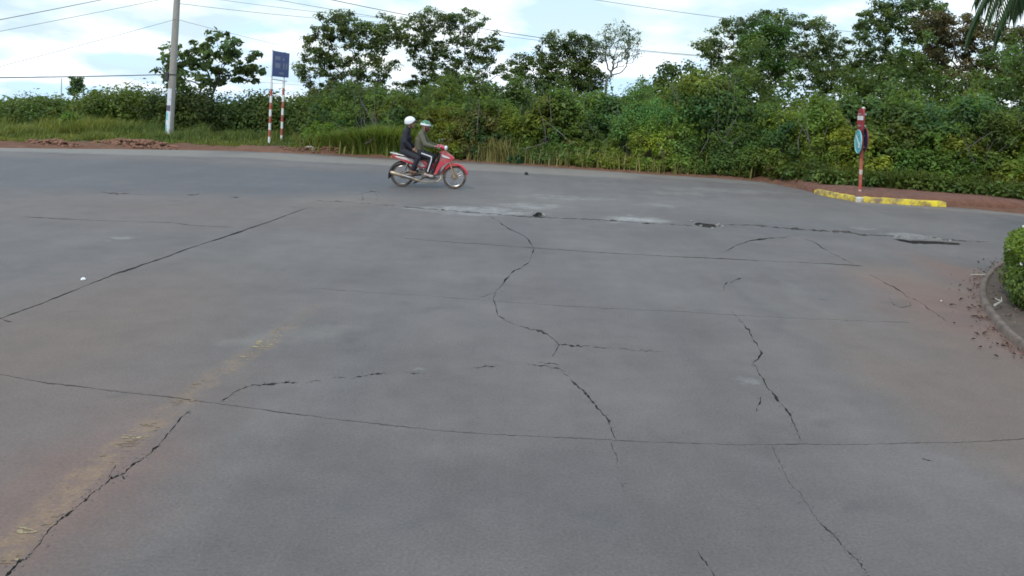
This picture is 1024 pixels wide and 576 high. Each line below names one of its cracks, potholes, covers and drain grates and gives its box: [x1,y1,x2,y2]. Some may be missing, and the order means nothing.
crack [221,364,495,402]
crack [314,185,946,496]
crack [5,411,191,576]
pothole [894,234,961,245]
crack [766,446,869,576]
